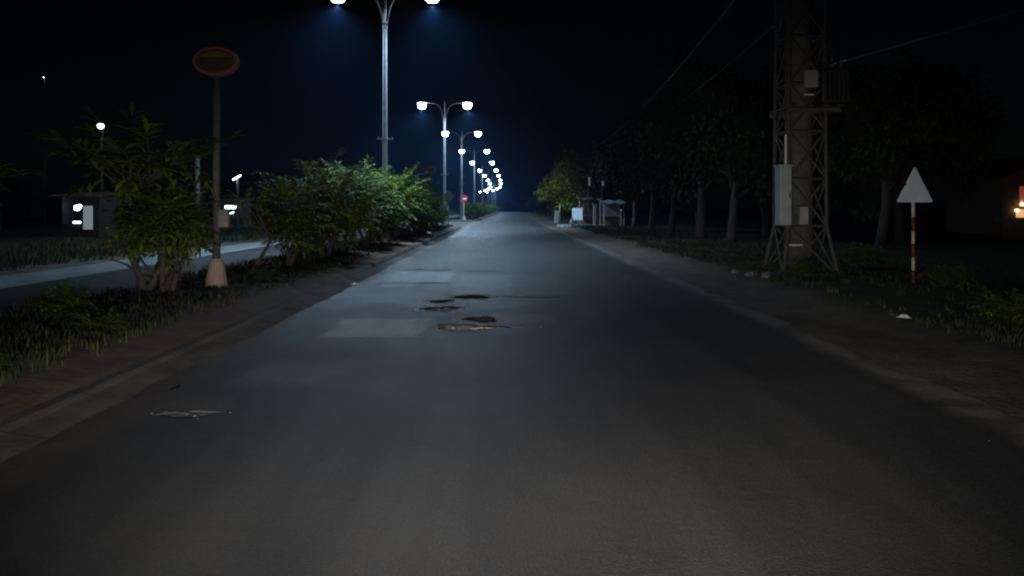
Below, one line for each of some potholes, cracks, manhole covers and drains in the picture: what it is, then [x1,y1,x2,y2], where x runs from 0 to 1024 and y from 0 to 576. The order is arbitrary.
pothole [416,321,541,334]
pothole [442,314,514,326]
pothole [407,305,469,313]
